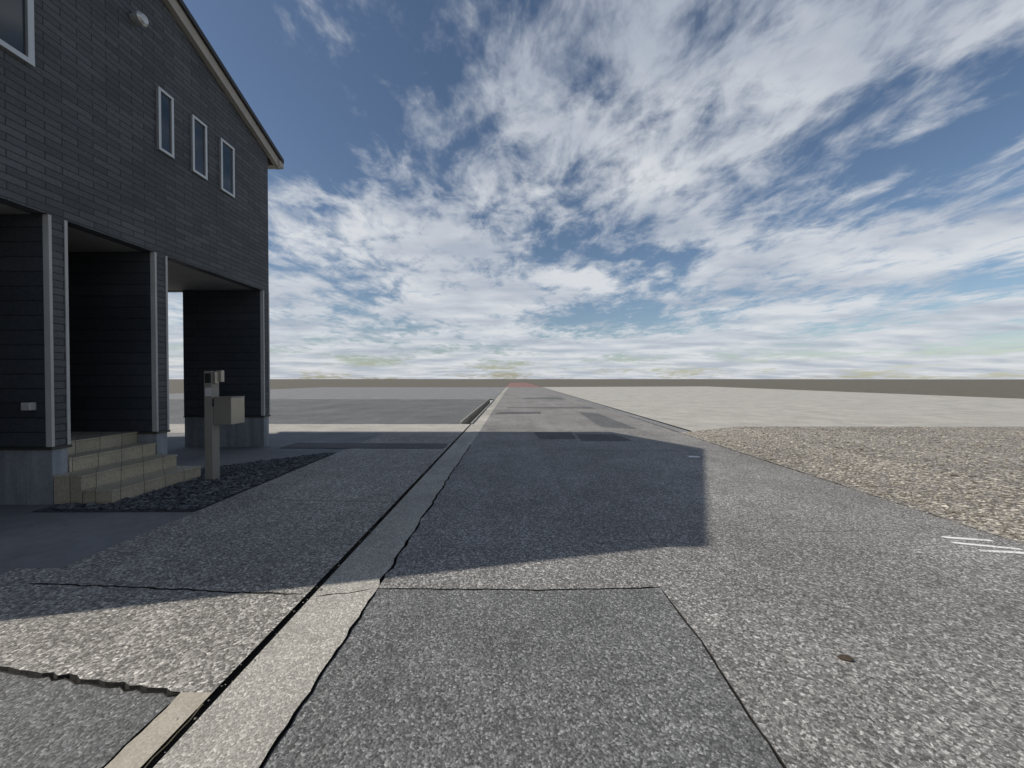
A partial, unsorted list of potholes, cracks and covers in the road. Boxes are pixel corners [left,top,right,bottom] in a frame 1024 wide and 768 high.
crack [29,445,470,603]
